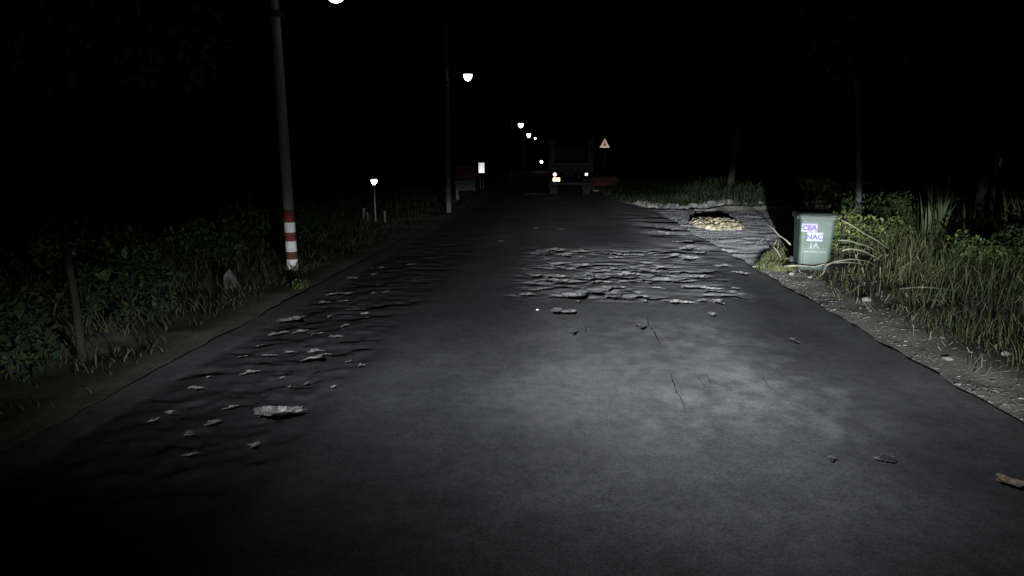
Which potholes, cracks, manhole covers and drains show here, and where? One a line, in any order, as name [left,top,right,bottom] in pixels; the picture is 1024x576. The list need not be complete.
crack [670,372,710,409]
pothole [277,315,310,323]
pothole [300,353,333,362]
pothole [561,291,592,300]
pothole [253,405,308,420]
crack [647,317,671,345]
